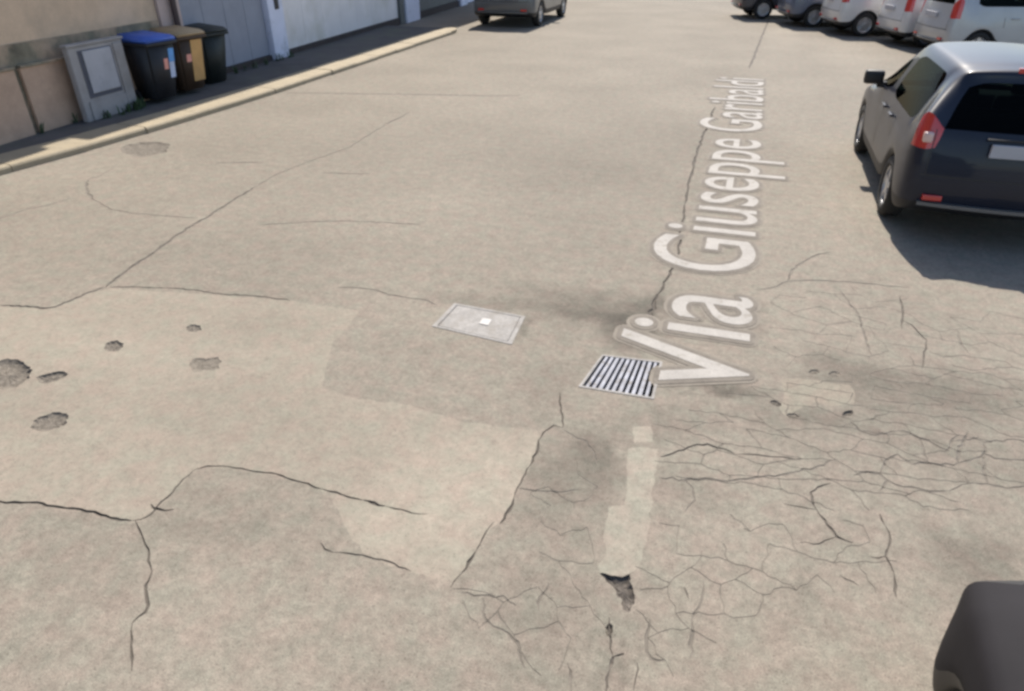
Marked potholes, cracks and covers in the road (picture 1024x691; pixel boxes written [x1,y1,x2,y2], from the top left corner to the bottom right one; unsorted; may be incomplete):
crack [453,252,1024,691]
crack [0,465,418,671]
drain grate [578,354,663,399]
pothole [36,371,68,383]
manhole cover [432,303,526,345]
pothole [189,357,222,372]
pothole [104,340,124,352]
pothole [0,358,32,390]
crack [0,114,419,309]
pothole [30,412,69,431]
crack [647,107,715,316]
crack [336,287,437,305]
